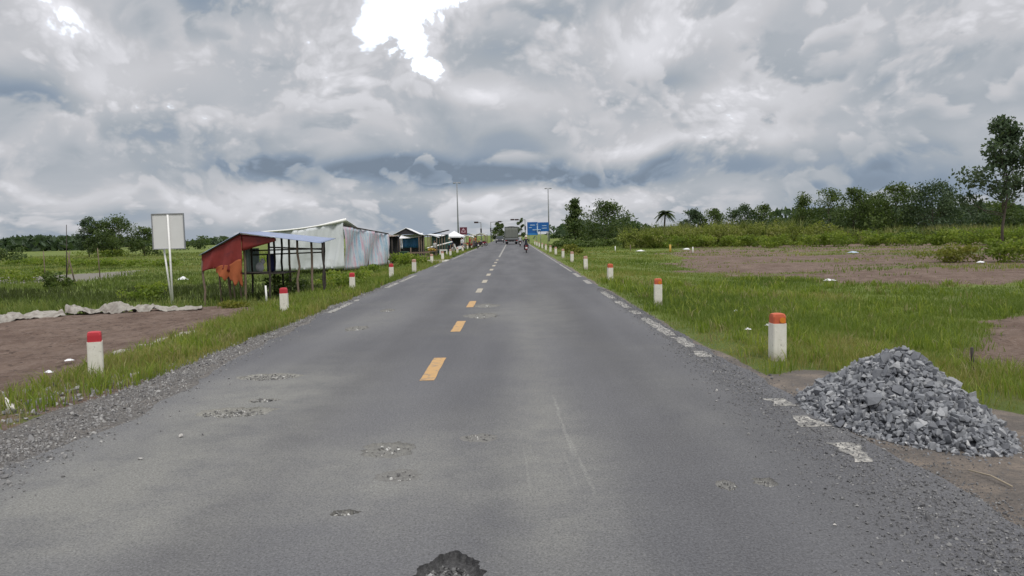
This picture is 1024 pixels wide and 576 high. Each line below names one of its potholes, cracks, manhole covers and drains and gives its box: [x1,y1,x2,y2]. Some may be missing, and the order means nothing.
pothole [195,407,279,418]
pothole [752,477,779,487]
pothole [413,550,487,576]
pothole [459,433,497,442]
pothole [373,469,422,483]
pothole [236,373,306,381]
pothole [360,441,416,458]
pothole [715,480,738,491]
